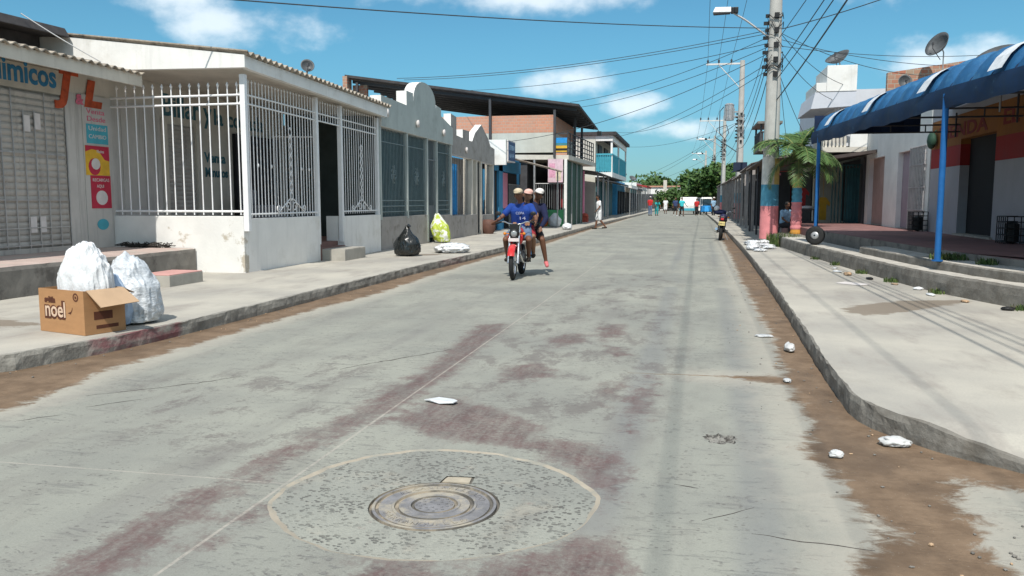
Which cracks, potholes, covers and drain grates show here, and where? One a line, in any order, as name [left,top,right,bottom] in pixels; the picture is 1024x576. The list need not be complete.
crack [88,376,240,407]
pothole [702,433,738,444]
manhole cover [368,477,500,531]
crack [758,534,874,551]
